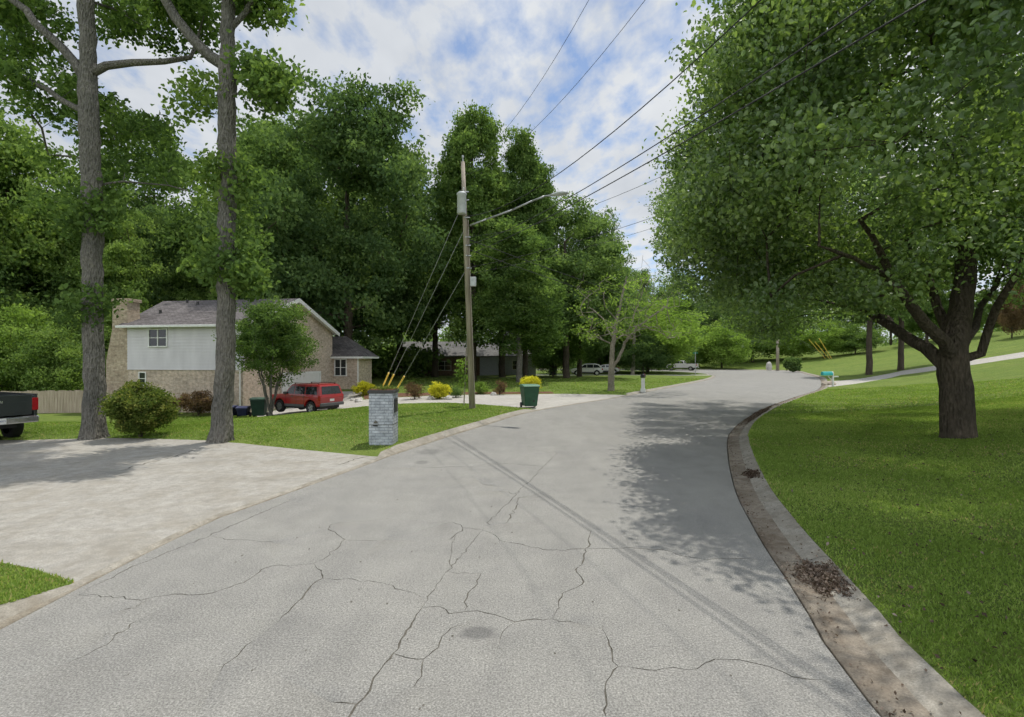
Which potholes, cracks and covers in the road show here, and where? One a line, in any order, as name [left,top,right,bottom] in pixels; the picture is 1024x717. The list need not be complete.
crack [334,453,756,717]
crack [603,630,818,716]
crack [75,524,419,660]
